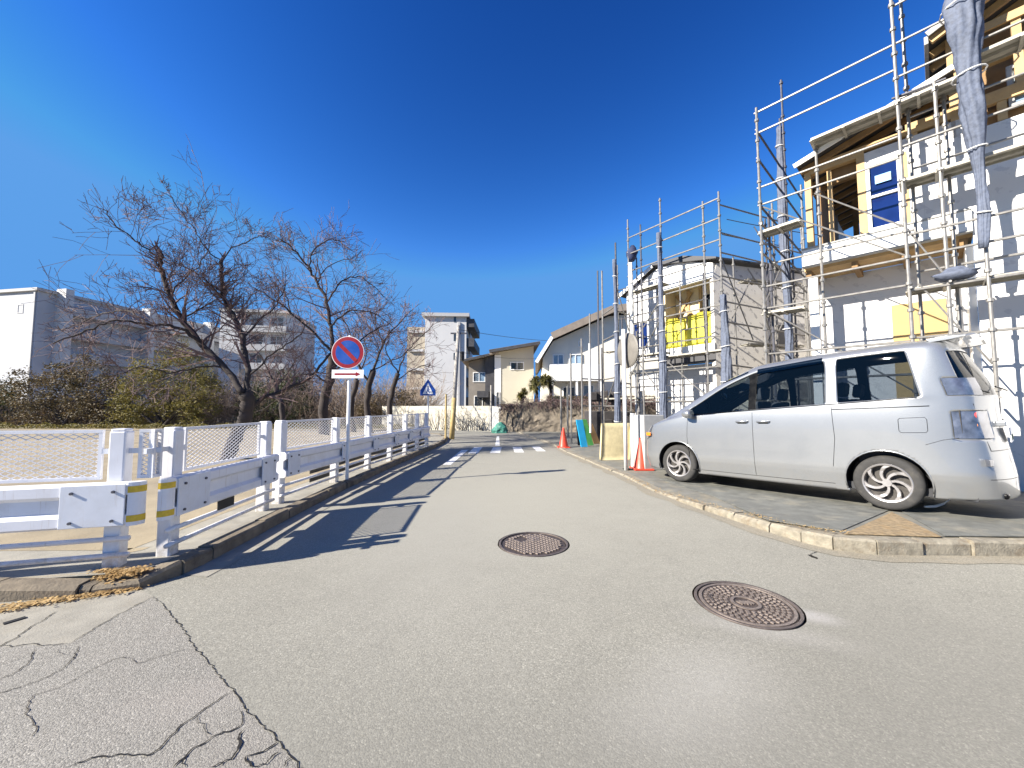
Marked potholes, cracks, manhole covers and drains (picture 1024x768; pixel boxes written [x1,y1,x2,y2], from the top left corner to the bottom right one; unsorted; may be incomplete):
crack [0,643,183,735]
manhole cover [499,532,568,557]
manhole cover [694,581,805,631]
crack [63,693,290,768]
